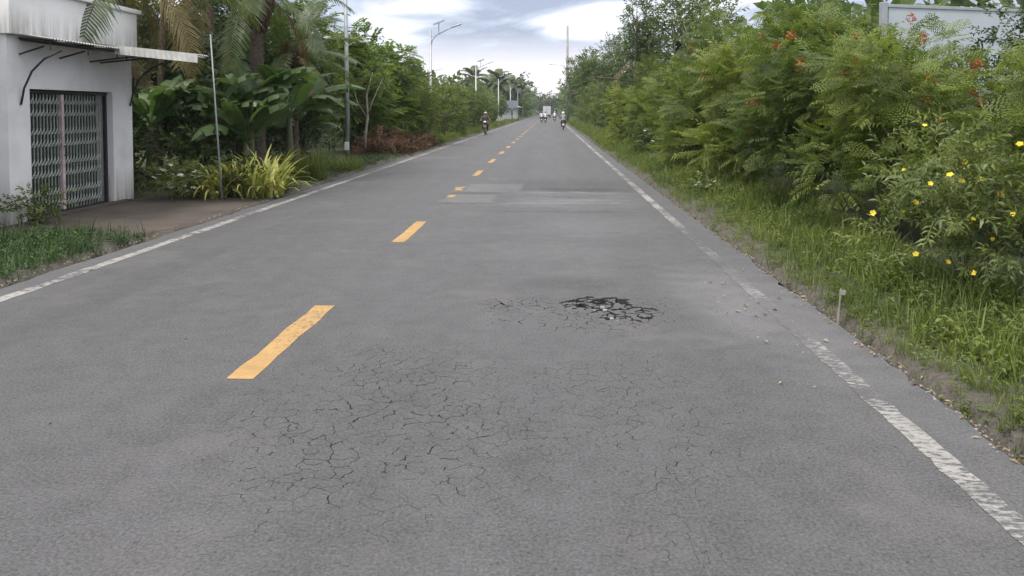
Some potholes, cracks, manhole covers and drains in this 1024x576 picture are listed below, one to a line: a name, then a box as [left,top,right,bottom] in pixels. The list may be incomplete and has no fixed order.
pothole [560,296,659,322]
crack [173,334,529,563]
crack [480,340,812,576]
crack [480,294,696,336]
